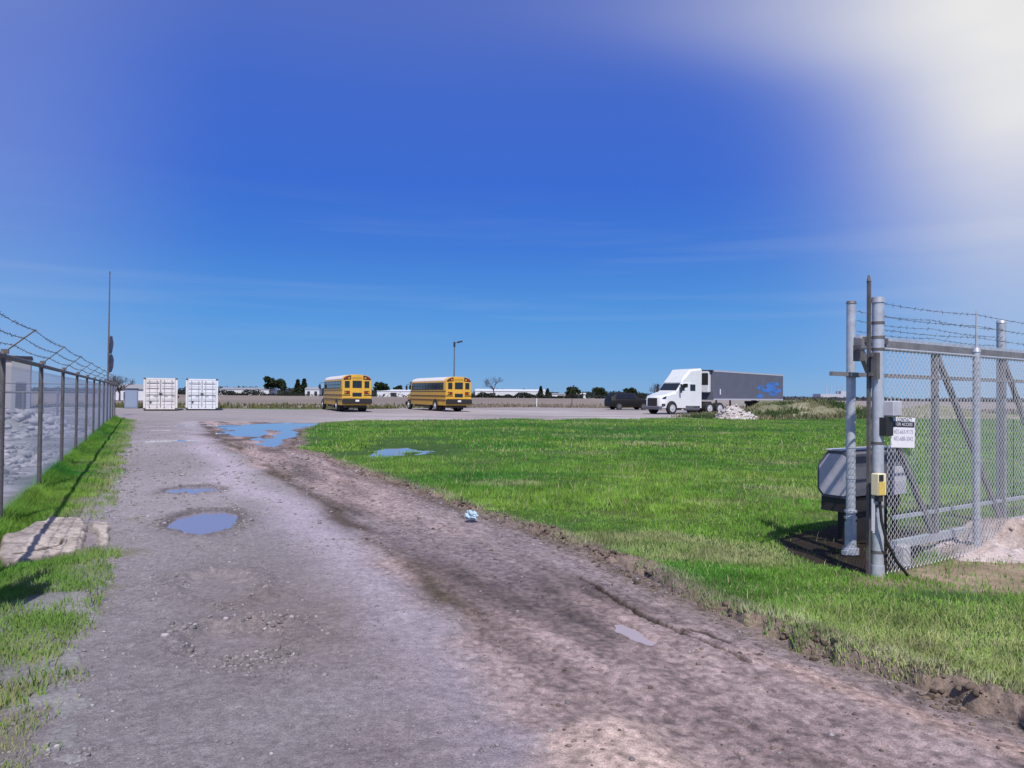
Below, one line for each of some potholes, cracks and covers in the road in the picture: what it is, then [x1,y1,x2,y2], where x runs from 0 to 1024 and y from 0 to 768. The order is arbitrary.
pothole [125,504,285,543]
pothole [152,482,238,497]
